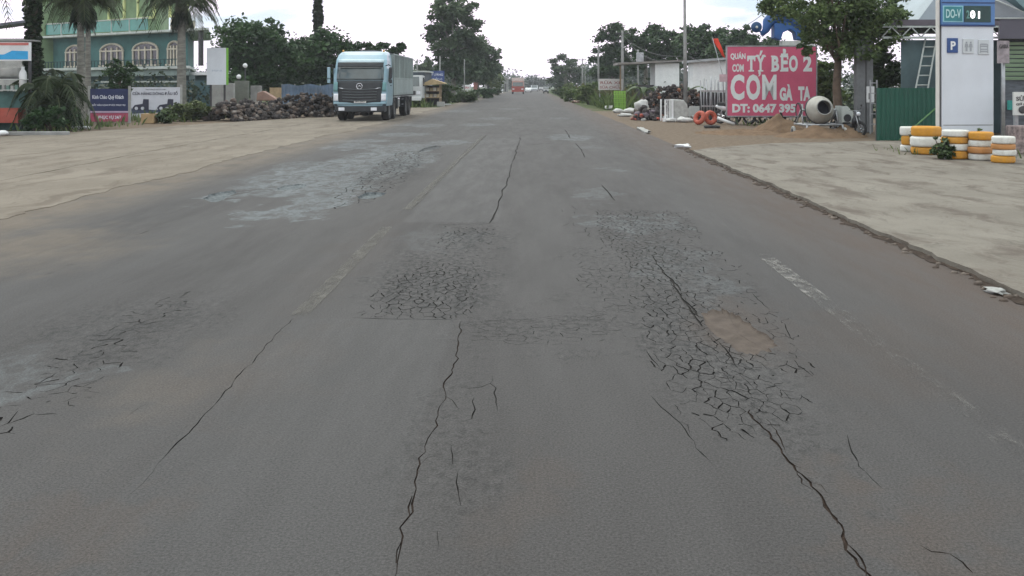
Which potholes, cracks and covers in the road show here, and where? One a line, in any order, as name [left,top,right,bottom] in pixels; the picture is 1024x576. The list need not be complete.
crack [395,186,882,576]
crack [481,130,597,225]
crack [0,291,191,434]
